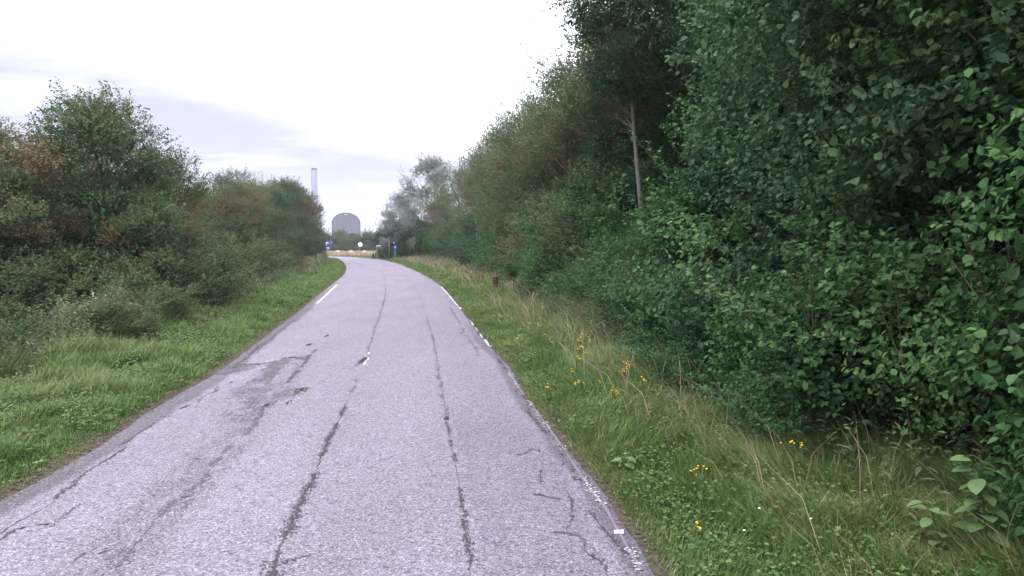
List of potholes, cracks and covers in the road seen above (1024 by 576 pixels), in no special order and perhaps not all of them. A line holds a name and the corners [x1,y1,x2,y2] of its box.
crack [518,403,630,576]
crack [258,400,358,576]
crack [70,406,265,576]
crack [1,320,315,539]
